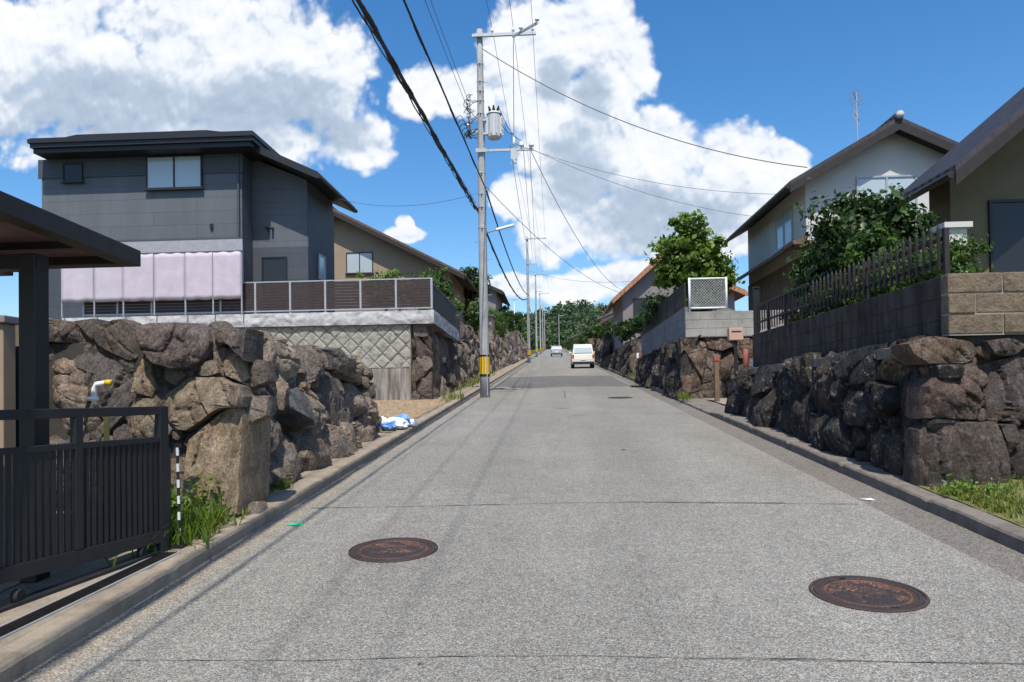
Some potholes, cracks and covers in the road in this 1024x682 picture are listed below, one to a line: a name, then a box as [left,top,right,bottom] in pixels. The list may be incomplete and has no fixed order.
manhole cover [348,537,438,562]
manhole cover [809,575,930,612]
